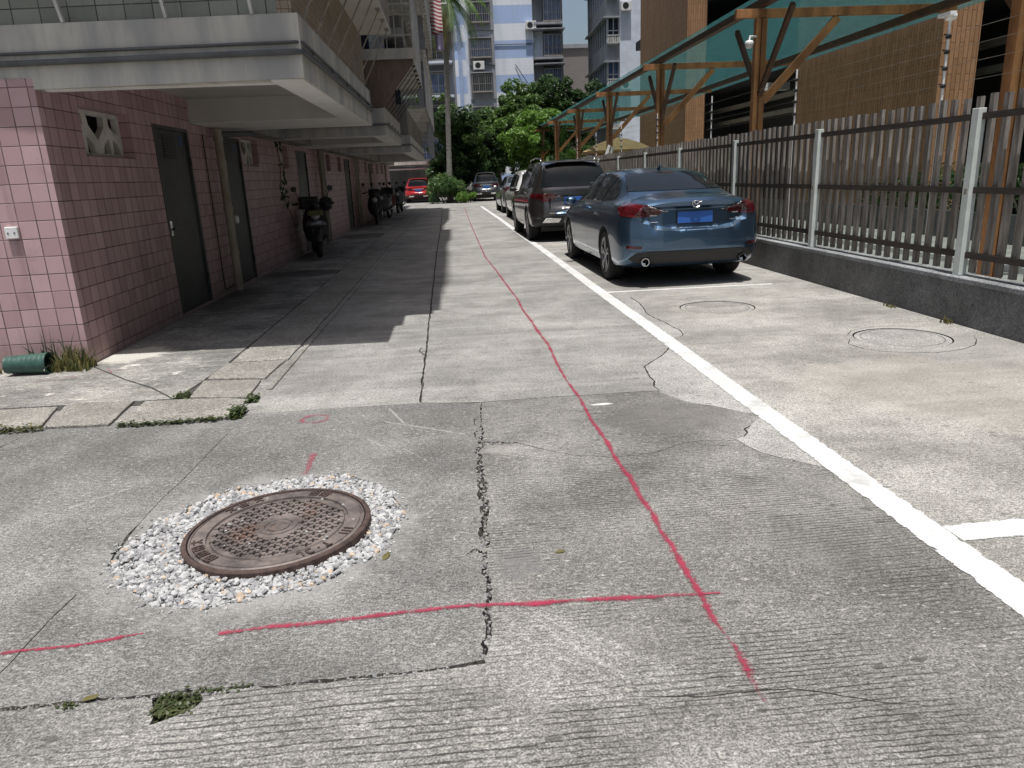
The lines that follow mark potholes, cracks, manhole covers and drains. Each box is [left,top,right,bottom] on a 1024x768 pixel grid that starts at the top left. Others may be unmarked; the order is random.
crack [466,403,813,663]
crack [629,688,926,706]
manhole cover [853,329,953,353]
crack [0,432,229,673]
manhole cover [180,488,372,590]
crack [630,296,683,390]
manhole cover [680,302,754,314]
